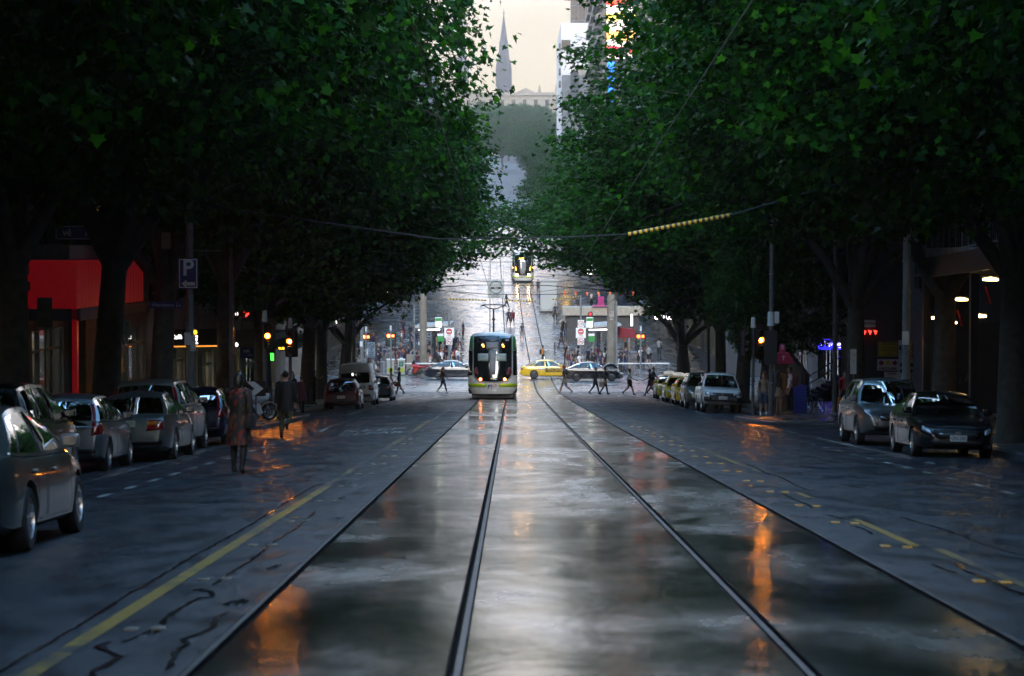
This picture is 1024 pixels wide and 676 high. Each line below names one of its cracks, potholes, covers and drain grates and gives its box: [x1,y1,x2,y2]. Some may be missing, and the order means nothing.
crack [159,512,315,670]
crack [88,635,139,676]
